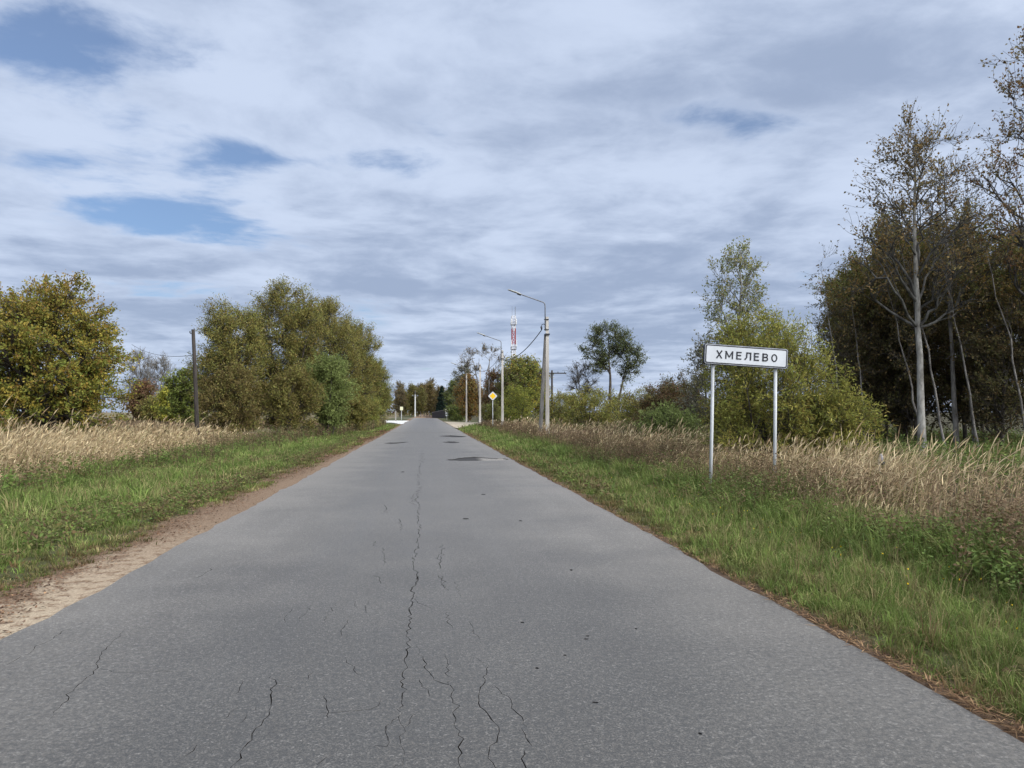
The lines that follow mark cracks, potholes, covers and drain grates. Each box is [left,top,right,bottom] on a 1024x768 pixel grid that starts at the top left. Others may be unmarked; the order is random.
crack [179,660,390,767]
crack [478,663,530,768]
crack [48,629,177,721]
crack [416,612,464,767]
